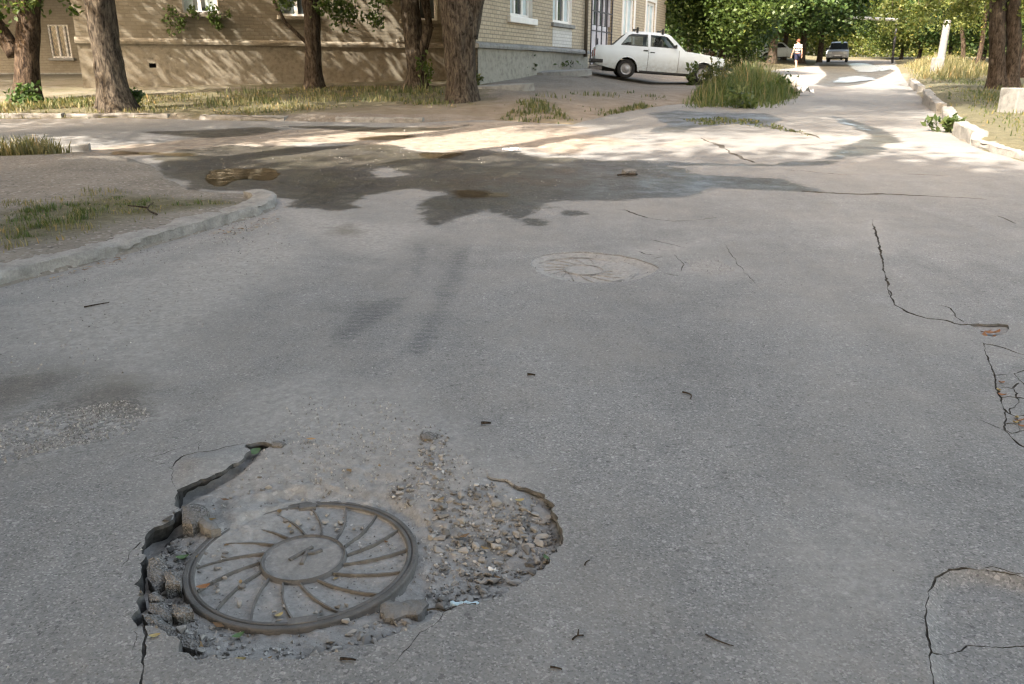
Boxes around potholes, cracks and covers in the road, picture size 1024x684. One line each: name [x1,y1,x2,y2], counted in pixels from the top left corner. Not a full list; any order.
manhole cover [182,501,418,636]
crack [132,627,148,684]
crack [924,566,1024,684]
pothole [131,427,564,662]
crack [872,219,968,325]
crack [783,169,978,199]
manhole cover [539,257,638,283]
crack [952,343,1024,447]
